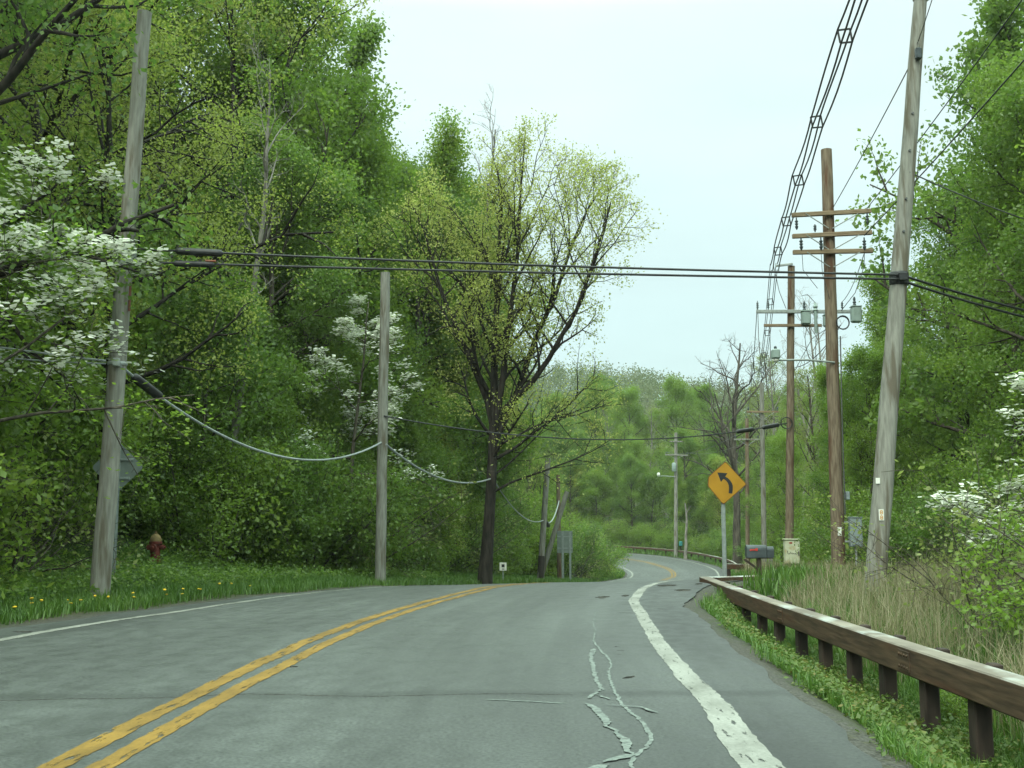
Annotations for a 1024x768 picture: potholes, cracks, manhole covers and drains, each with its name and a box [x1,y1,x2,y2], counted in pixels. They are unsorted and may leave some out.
crack [585,611,657,768]
crack [0,693,560,703]
